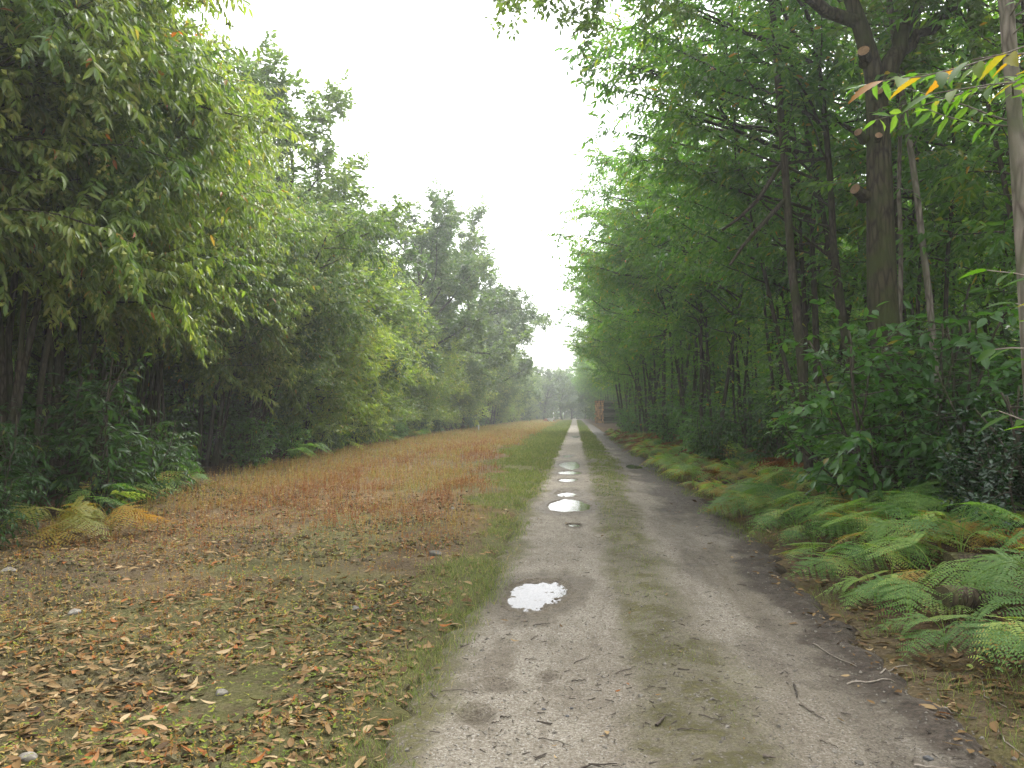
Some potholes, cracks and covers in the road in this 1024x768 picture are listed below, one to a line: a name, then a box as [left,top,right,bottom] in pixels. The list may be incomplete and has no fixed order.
pothole [557,461,582,470]
pothole [475,675,521,695]
pothole [500,577,578,615]
pothole [452,701,495,728]
pothole [536,669,562,684]
pothole [544,498,595,513]
pothole [552,488,585,497]
